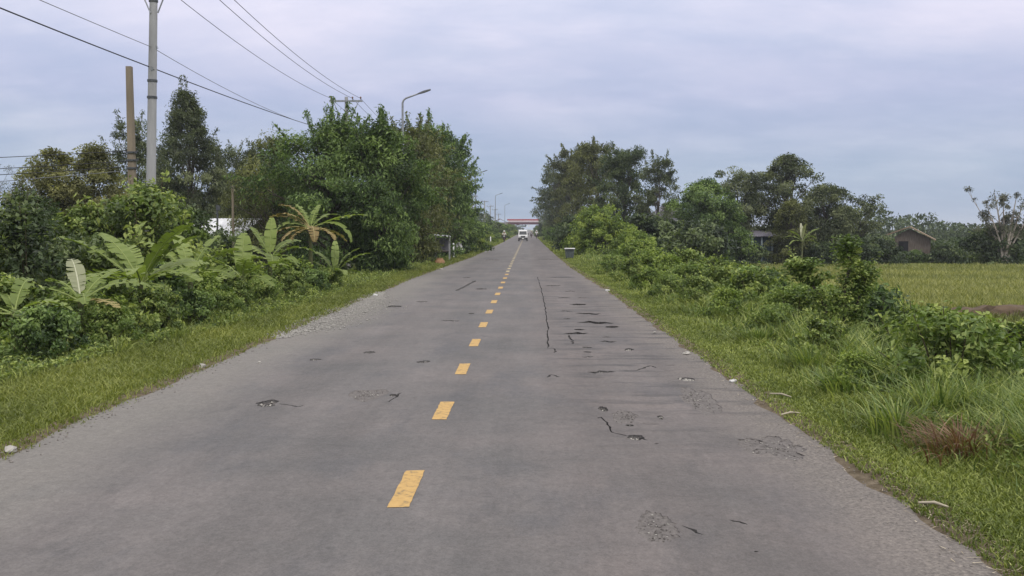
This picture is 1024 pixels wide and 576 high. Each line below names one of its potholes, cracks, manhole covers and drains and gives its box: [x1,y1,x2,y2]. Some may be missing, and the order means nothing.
pothole [348,389,389,402]
pothole [679,387,723,416]
pothole [612,410,638,423]
pothole [737,436,807,461]
crack [537,277,574,353]
pothole [256,399,279,407]
pothole [635,510,680,543]
crack [598,417,660,444]
